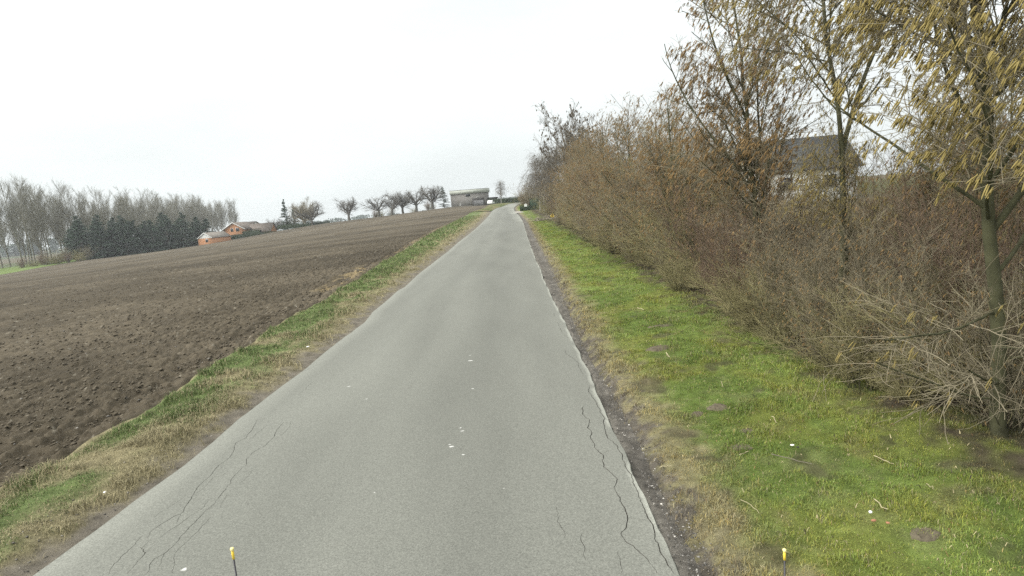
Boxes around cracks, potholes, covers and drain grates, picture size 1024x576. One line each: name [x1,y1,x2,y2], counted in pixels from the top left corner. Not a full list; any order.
crack [109,421,291,573]
crack [565,336,673,573]
